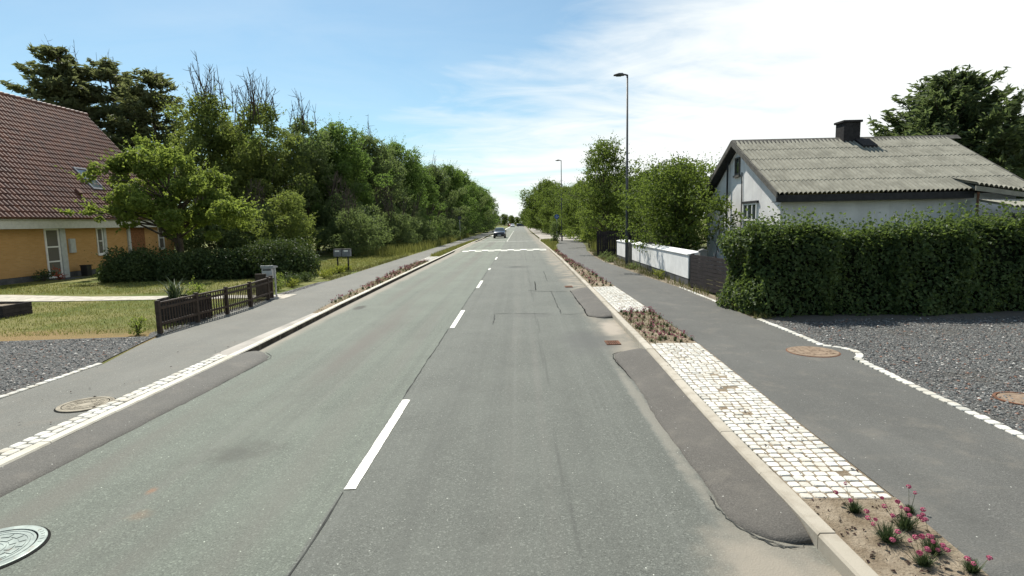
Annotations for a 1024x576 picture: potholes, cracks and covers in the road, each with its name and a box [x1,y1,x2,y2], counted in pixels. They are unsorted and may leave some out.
manhole cover [54,396,116,413]
manhole cover [0,525,51,569]
manhole cover [786,346,841,357]
manhole cover [992,391,1024,406]
